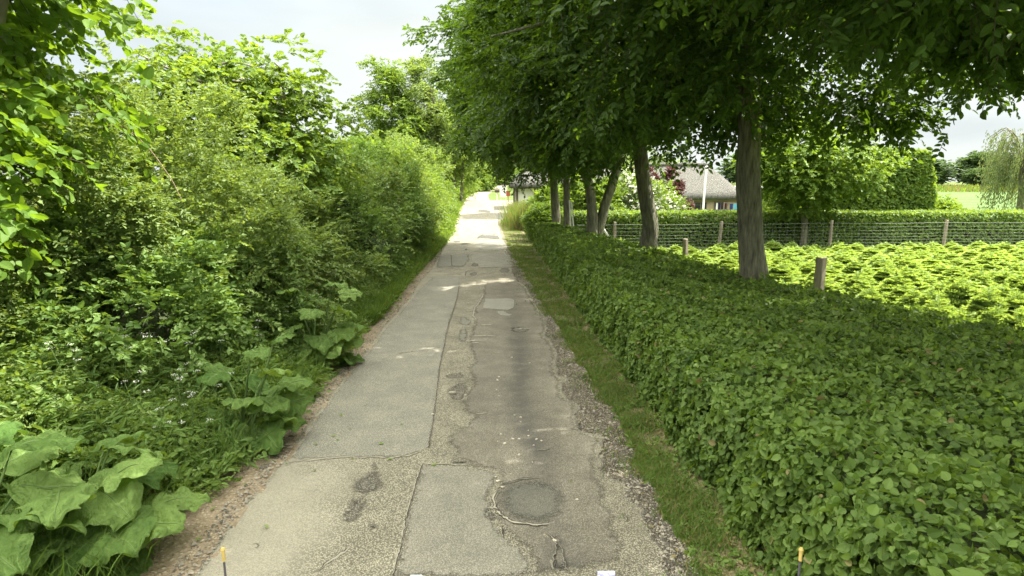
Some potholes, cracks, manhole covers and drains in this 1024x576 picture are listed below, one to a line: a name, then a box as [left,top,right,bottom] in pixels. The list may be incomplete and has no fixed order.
pothole [448,384,467,400]
crack [492,477,570,573]
